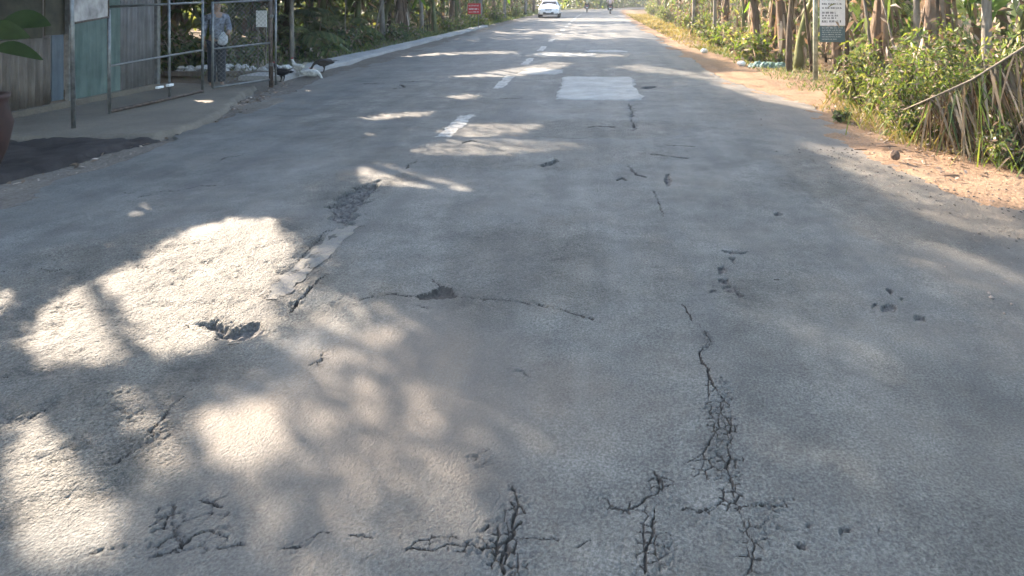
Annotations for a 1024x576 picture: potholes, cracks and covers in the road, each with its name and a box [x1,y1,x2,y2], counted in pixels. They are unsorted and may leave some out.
crack [526,102,705,220]
crack [273,224,603,326]
crack [0,274,811,576]
pothole [313,178,393,231]
pothole [860,284,938,326]
pothole [186,315,287,347]
